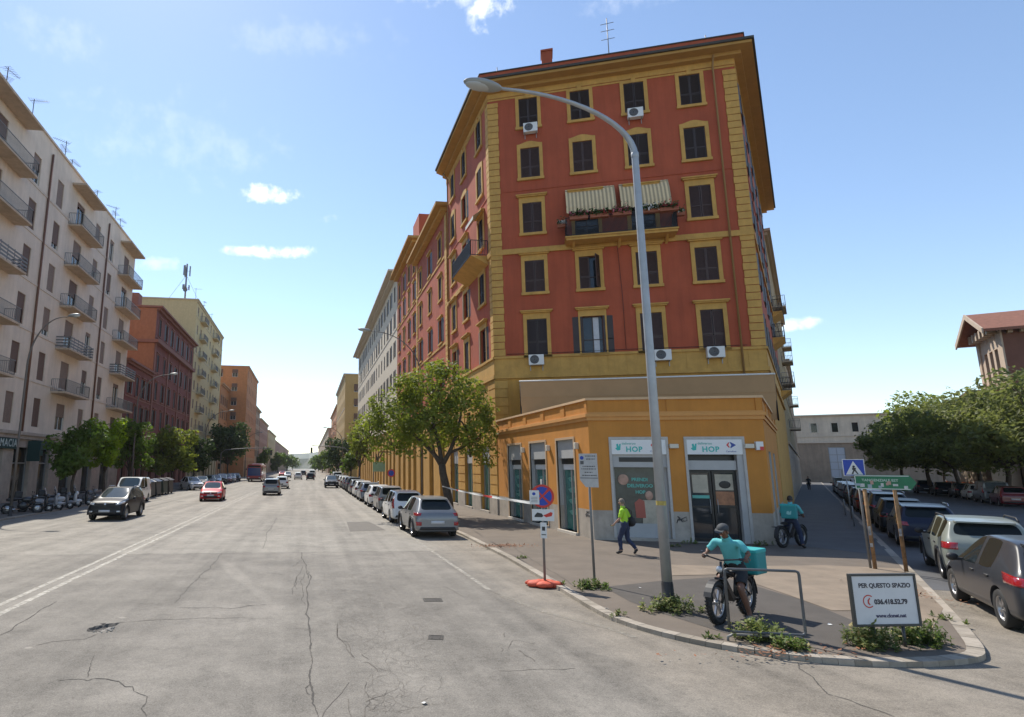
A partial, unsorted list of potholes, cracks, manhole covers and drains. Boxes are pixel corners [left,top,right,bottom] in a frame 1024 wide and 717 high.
crack [281,553,448,717]
crack [119,556,266,623]
crack [797,662,892,716]
crack [39,635,148,716]
